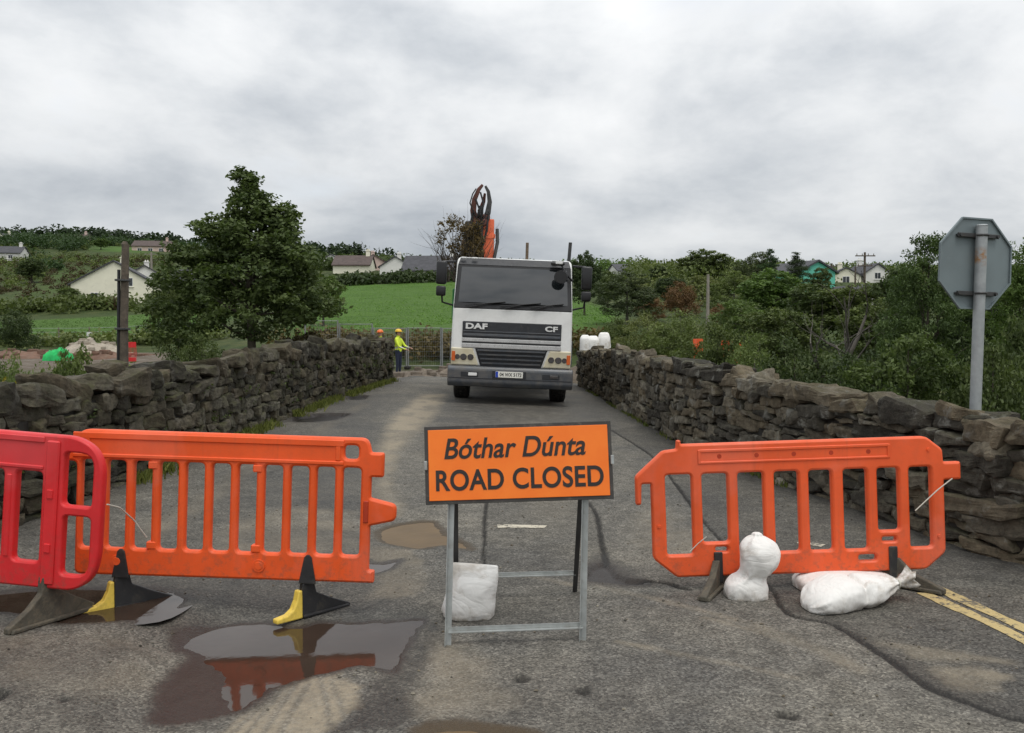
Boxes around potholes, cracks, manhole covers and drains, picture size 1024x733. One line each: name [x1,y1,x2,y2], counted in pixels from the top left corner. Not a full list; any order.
crack [611,430,1024,725]
pothole [410,719,543,733]
crack [589,501,613,566]
pothole [374,520,474,551]
pothole [145,618,428,726]
